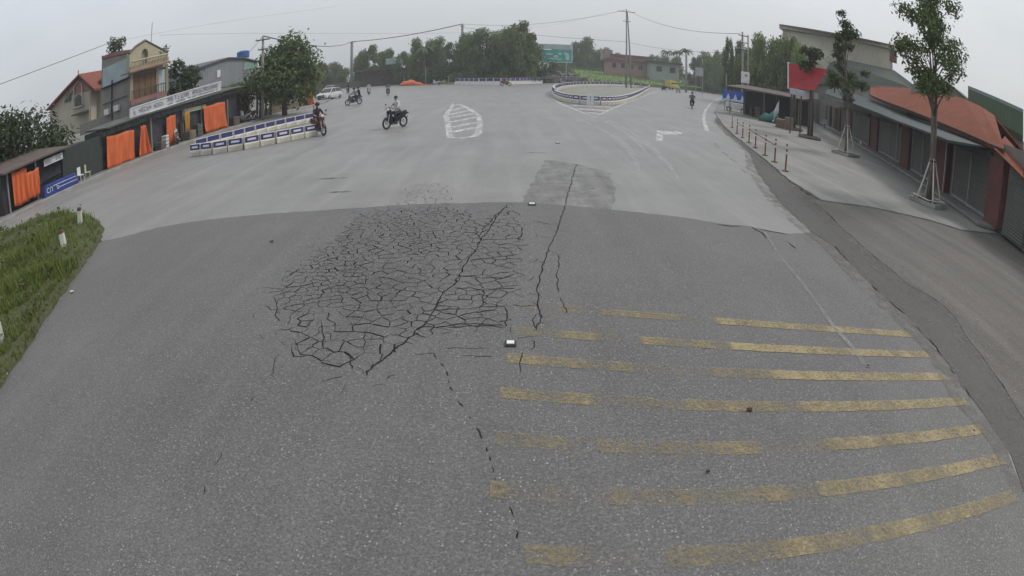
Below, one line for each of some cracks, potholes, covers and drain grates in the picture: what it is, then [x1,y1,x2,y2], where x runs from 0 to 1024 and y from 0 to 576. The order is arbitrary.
crack [250,204,537,539]
crack [397,183,455,205]
crack [513,165,577,372]
